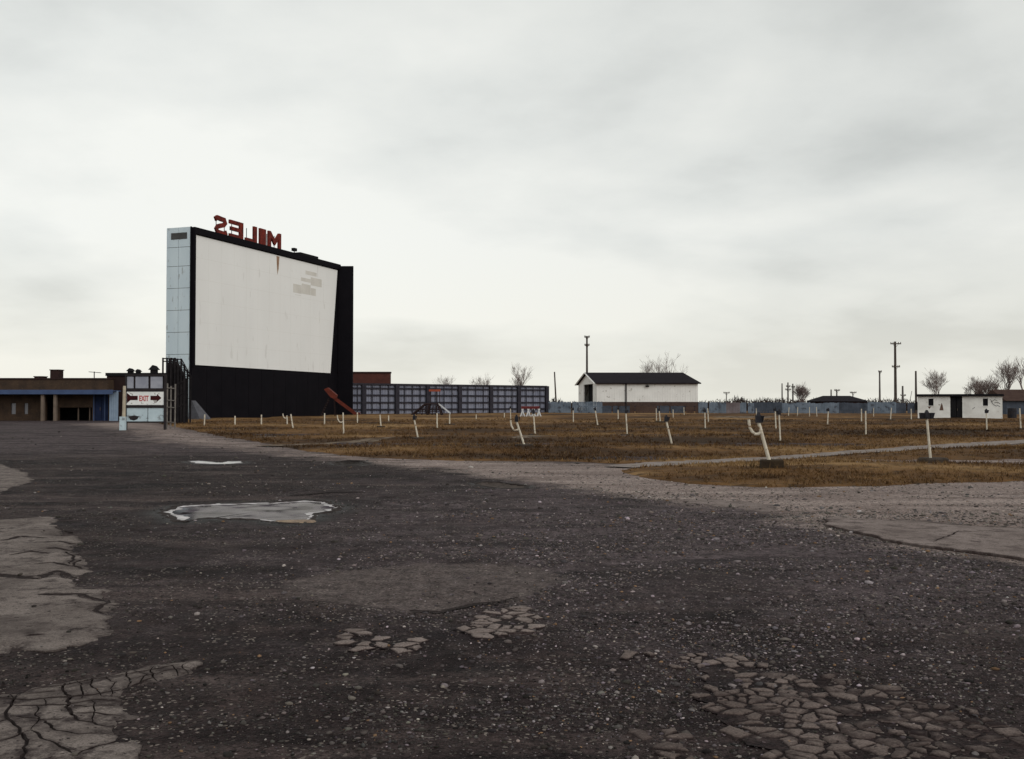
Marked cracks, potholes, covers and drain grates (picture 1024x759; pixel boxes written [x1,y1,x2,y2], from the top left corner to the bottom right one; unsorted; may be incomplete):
crack [410,597,547,640]
pothole [158,500,345,524]
crack [0,662,188,759]
crack [333,630,430,656]
crack [619,651,1024,759]
